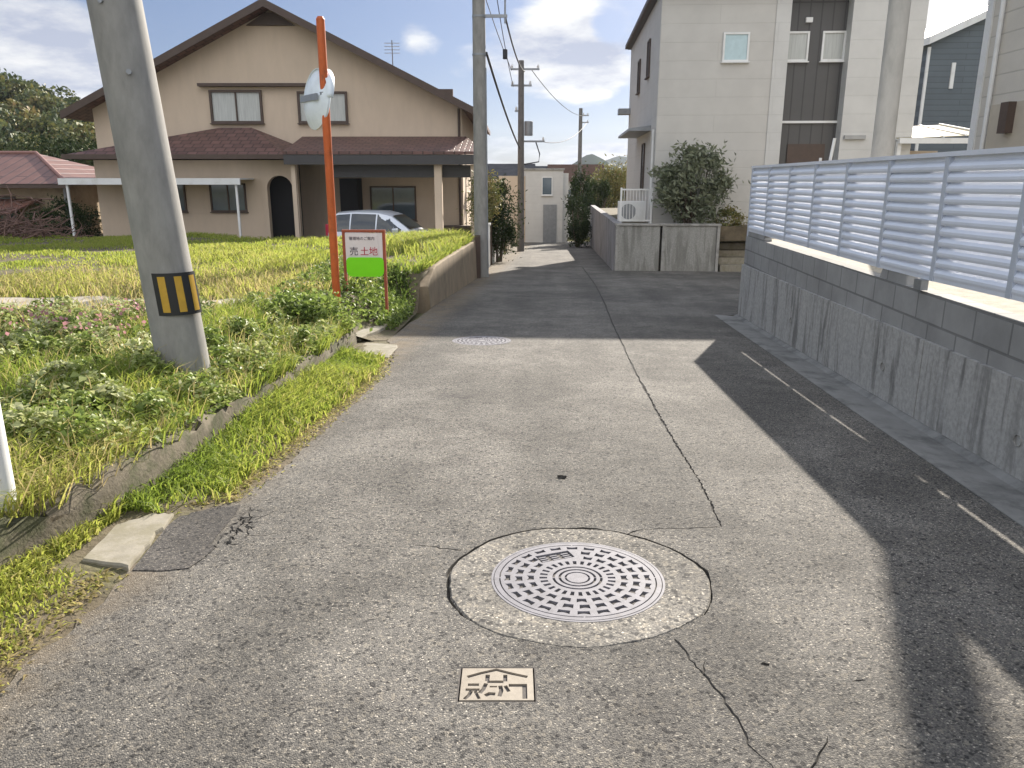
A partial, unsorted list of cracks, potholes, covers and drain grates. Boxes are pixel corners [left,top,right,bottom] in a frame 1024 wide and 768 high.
crack [214,507,280,548]
crack [674,639,773,768]
crack [810,736,828,768]
manhole cover [452,336,511,345]
manhole cover [446,527,713,648]
utility cover [456,667,537,702]
crack [582,267,722,535]
